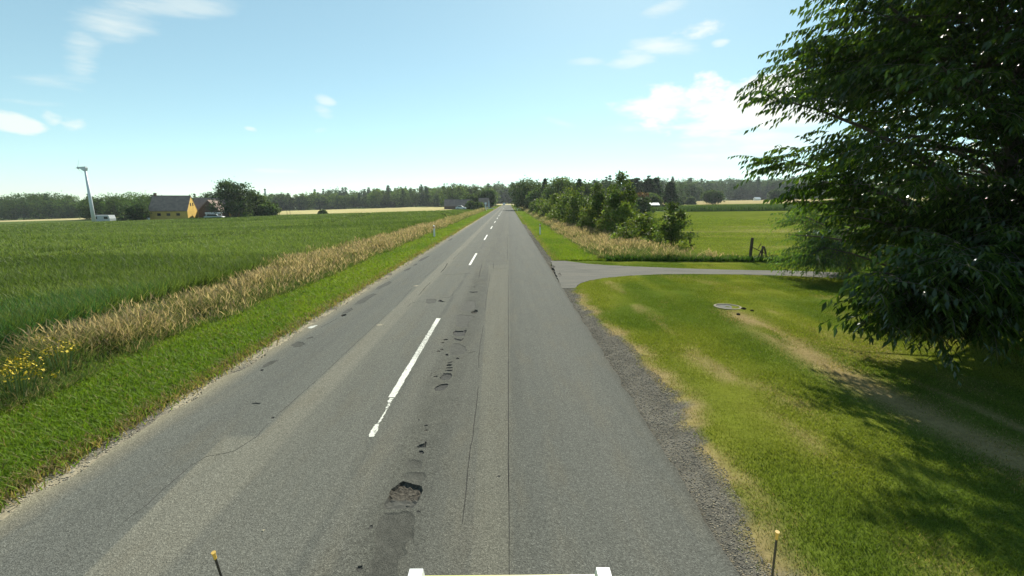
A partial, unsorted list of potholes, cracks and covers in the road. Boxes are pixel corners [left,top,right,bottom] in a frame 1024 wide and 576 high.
crack [125,247,504,521]
pothole [383,481,423,510]
